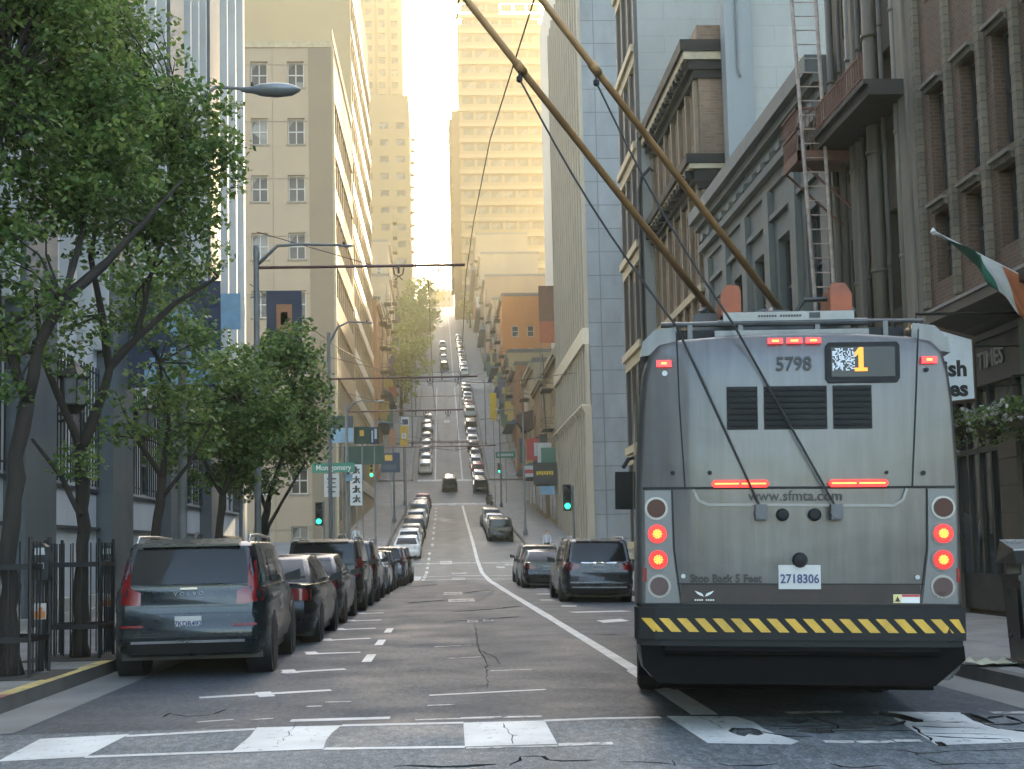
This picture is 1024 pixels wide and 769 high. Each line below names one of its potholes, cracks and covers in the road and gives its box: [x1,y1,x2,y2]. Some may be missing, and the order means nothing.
crack [729,715,1024,768]
pothole [731,728,763,736]
crack [412,584,519,686]
crack [398,756,592,768]
